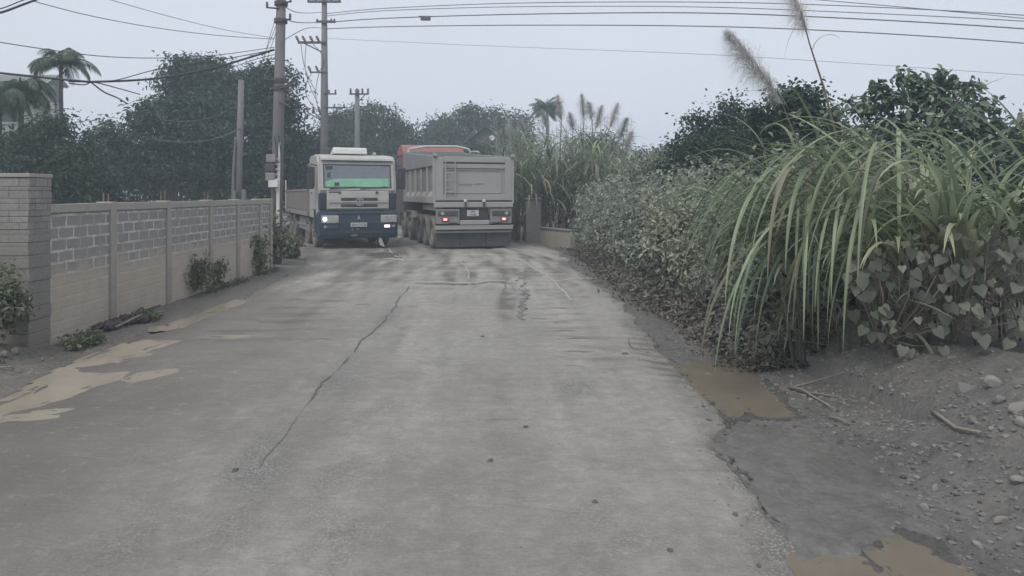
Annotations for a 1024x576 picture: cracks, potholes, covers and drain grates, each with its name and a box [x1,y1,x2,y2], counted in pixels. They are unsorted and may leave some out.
crack [260,269,596,466]
